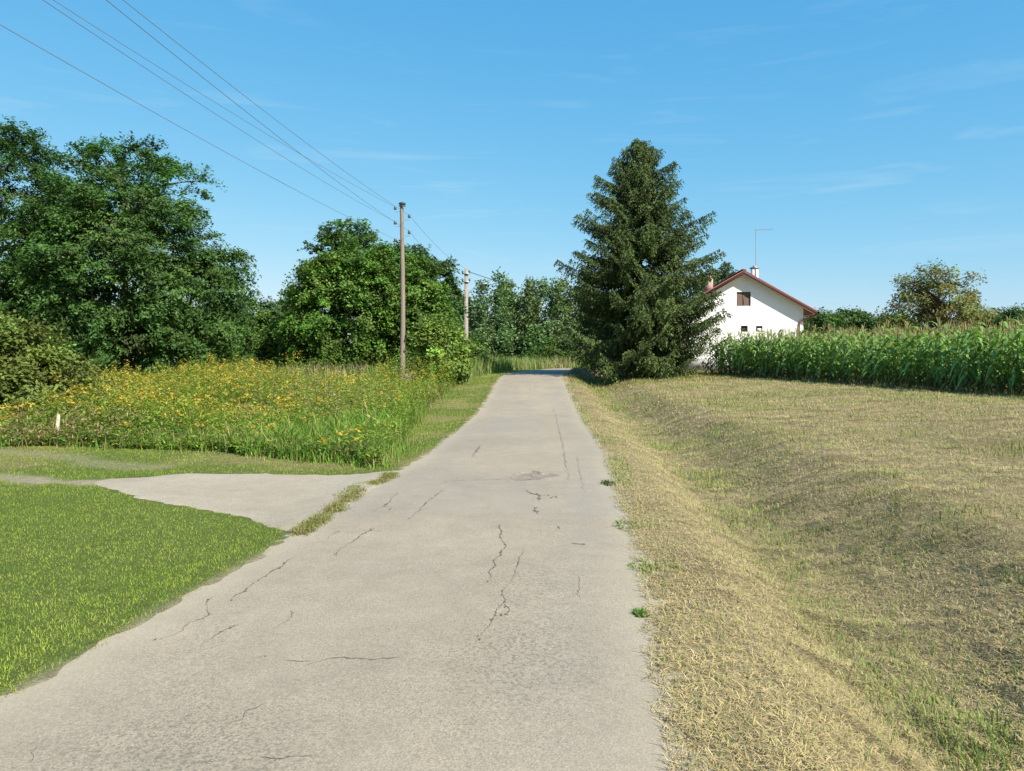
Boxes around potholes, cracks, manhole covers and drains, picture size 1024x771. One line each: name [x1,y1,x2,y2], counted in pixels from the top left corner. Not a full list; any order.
crack [477,526,524,640]
